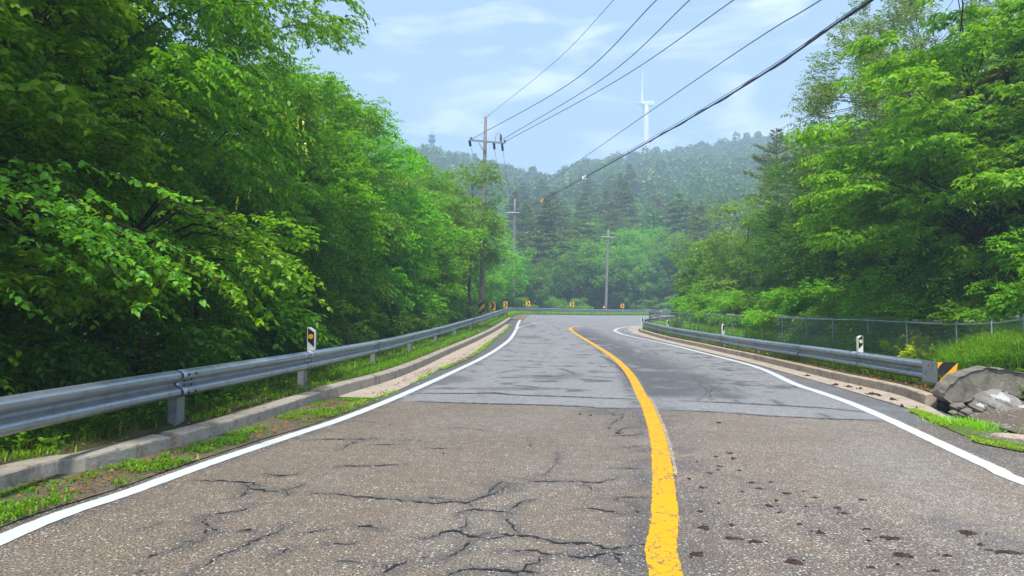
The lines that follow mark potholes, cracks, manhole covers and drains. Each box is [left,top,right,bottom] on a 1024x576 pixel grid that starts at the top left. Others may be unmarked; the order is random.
crack [135,471,646,576]
crack [528,451,647,515]
